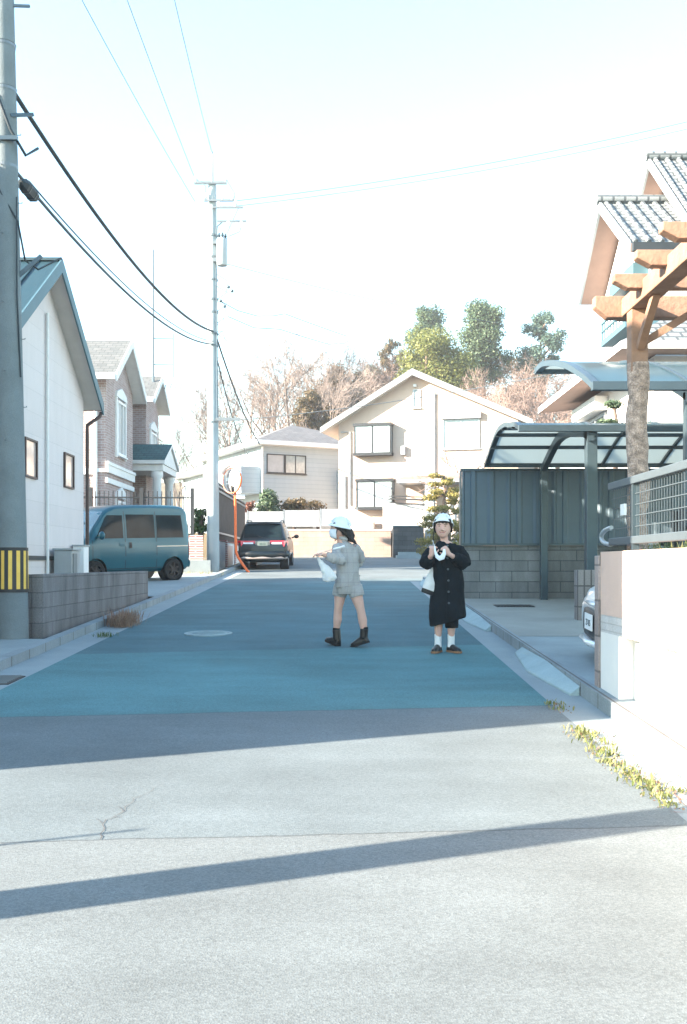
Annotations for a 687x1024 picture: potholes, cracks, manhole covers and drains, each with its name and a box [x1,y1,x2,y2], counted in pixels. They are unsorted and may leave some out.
drain grate [0,675,26,685]
